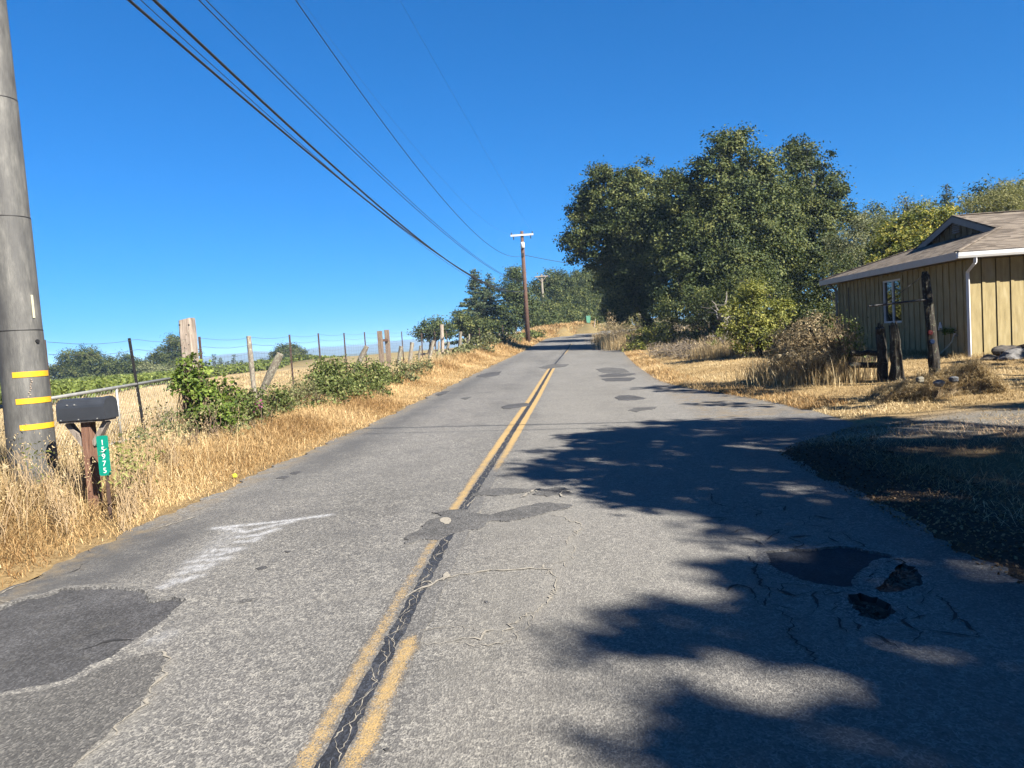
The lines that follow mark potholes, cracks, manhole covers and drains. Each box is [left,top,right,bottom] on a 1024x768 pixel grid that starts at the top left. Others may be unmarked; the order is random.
pothole [851,557,936,598]
pothole [755,544,904,592]
crack [318,433,582,768]
pothole [834,590,911,627]
crack [702,494,979,664]
